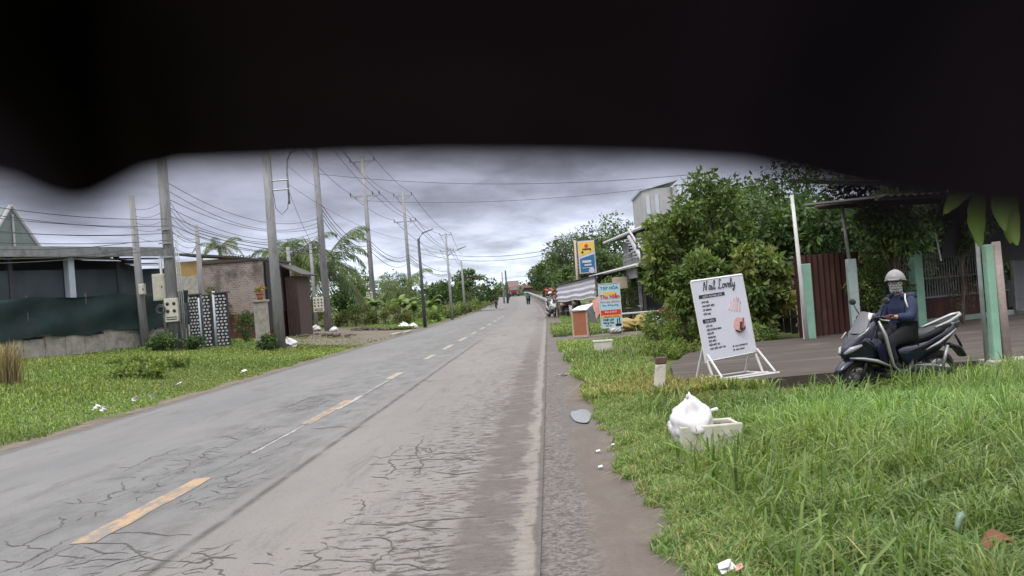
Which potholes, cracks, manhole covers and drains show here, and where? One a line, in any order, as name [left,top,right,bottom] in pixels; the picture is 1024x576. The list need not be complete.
crack [0,381,482,576]
